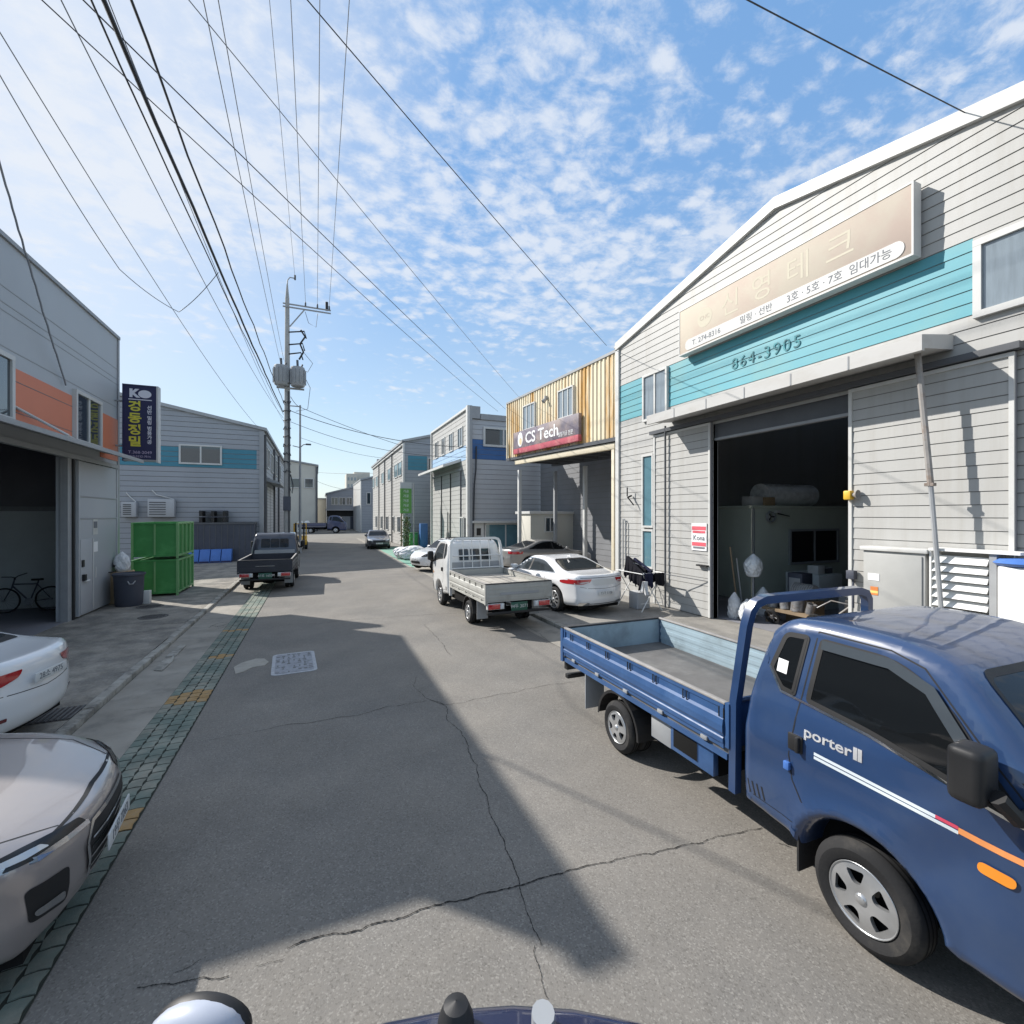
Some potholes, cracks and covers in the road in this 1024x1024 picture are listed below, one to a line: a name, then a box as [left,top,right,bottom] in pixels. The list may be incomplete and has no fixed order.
drain grate [24,704,86,726]
manhole cover [271,651,317,676]
crack [137,678,761,998]
